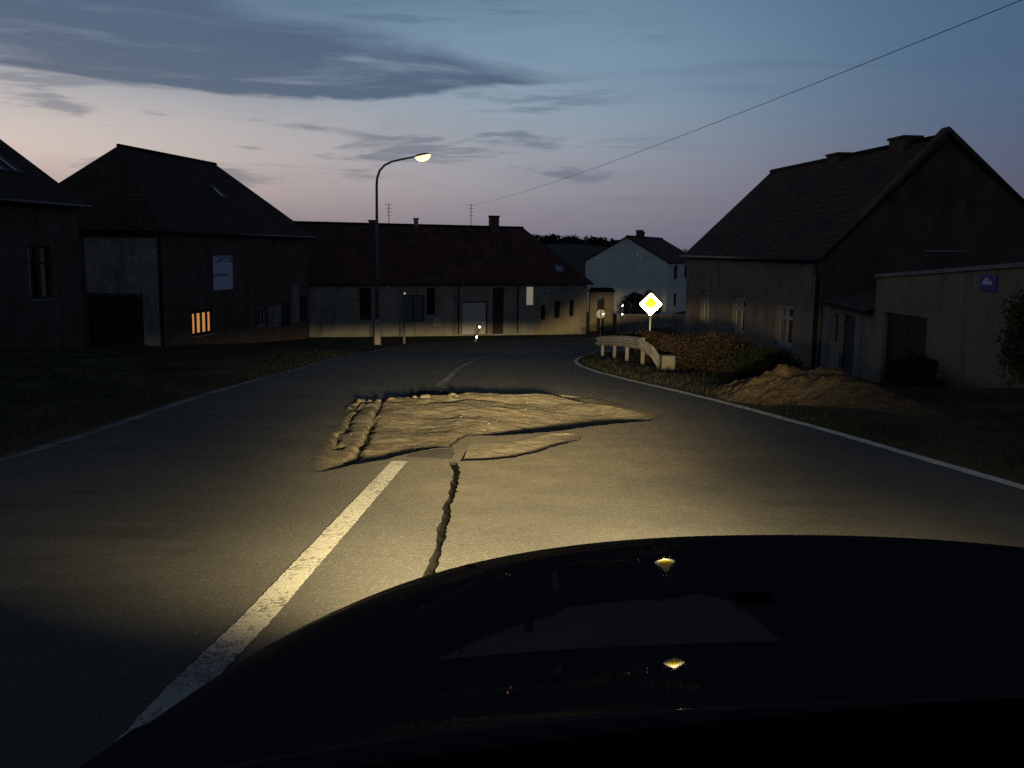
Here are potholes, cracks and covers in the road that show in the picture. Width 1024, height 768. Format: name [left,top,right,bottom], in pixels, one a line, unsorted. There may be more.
crack [422,434,582,577]
